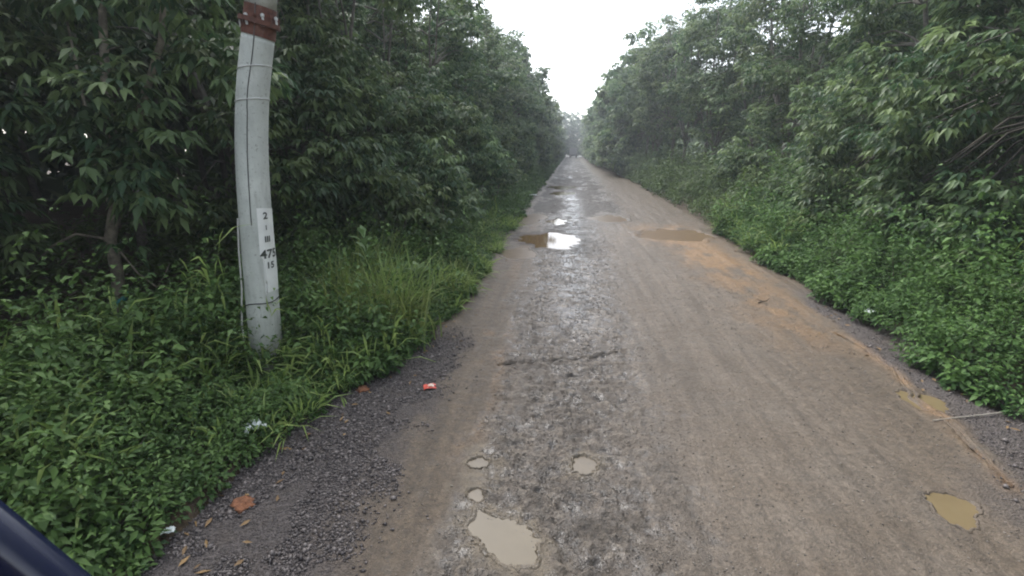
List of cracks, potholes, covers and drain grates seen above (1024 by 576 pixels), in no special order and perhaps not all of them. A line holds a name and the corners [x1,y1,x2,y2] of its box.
crack [498,351,618,366]
pothole [892,388,953,415]
pothole [628,227,723,243]
pothole [508,231,587,251]
pothole [463,506,547,572]
pothole [465,486,486,503]
pothole [569,452,602,476]
pothole [921,490,984,534]
pothole [585,214,632,223]
pothole [464,455,492,470]
